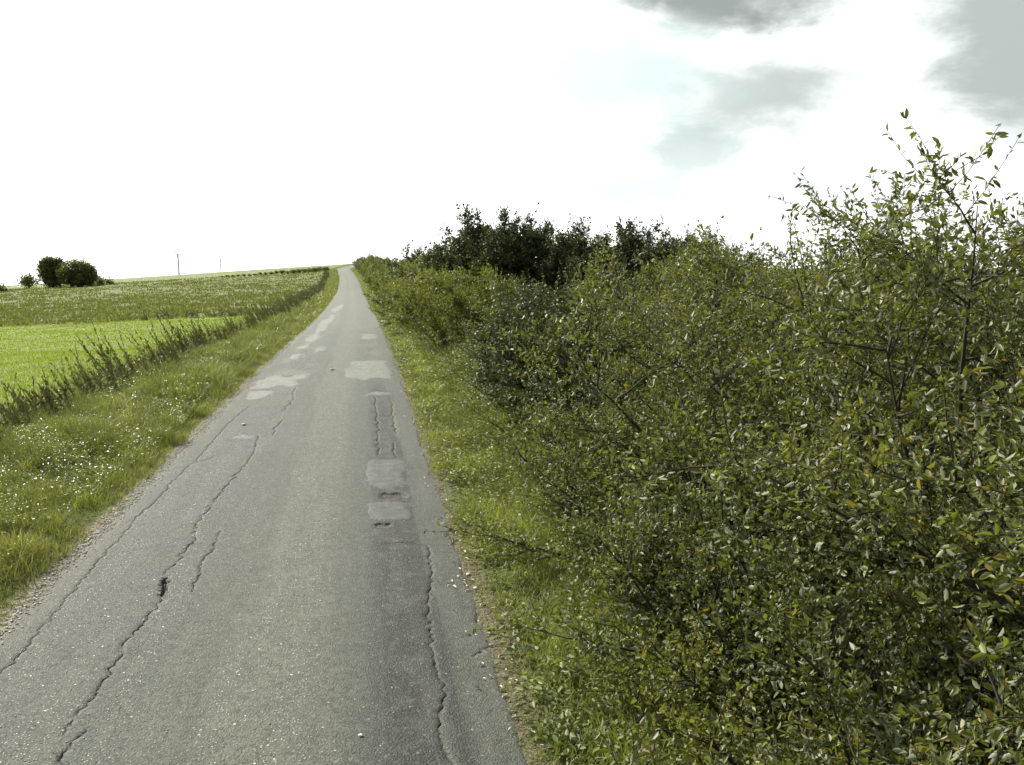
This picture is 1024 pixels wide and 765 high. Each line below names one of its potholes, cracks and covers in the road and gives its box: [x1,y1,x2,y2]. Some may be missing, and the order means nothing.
crack [372,396,400,457]
pothole [377,492,411,500]
pothole [157,576,173,600]
crack [52,387,298,765]
